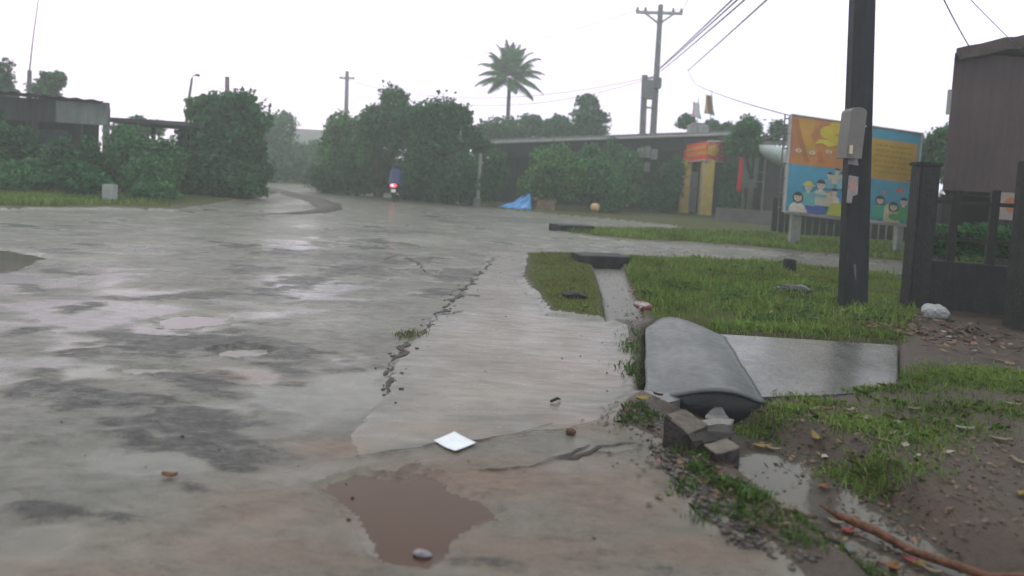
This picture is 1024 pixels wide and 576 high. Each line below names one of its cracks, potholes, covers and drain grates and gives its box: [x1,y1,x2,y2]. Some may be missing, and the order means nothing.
pothole [0,247,60,273]
crack [383,257,496,393]
crack [484,442,636,470]
pothole [301,463,512,570]
